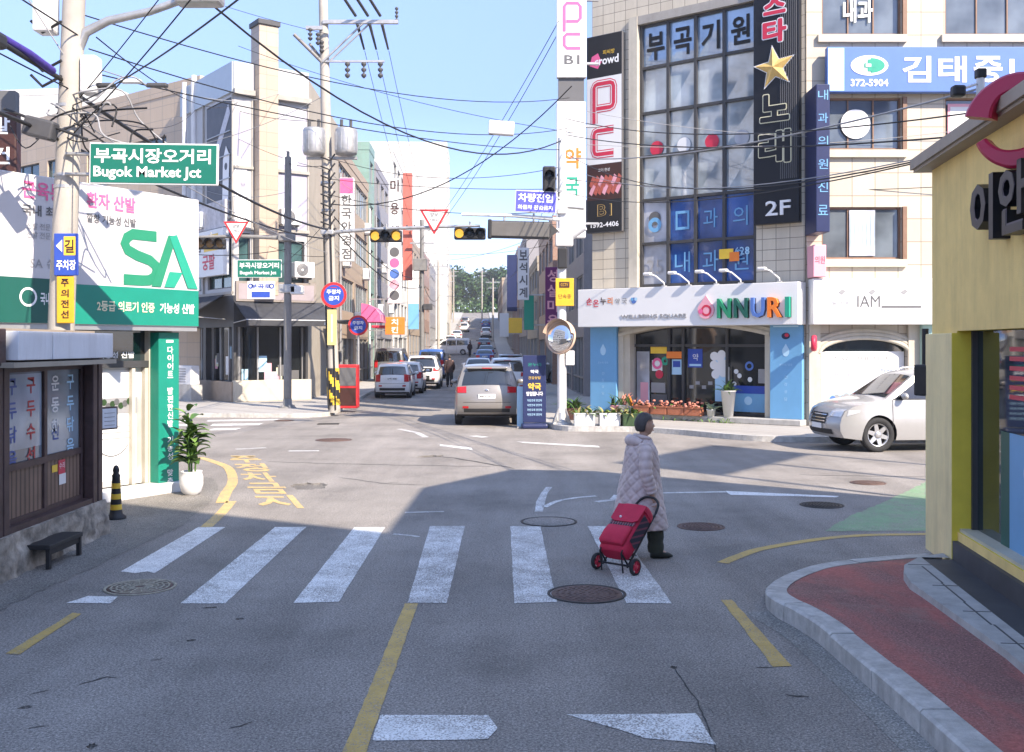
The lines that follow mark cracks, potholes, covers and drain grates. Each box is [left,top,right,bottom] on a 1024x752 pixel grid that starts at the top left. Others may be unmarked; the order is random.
crack [673,667,717,752]
manhole cover [103,579,177,596]
manhole cover [677,522,725,531]
manhole cover [520,516,577,527]
manhole cover [547,584,626,604]
manhole cover [800,501,844,509]
